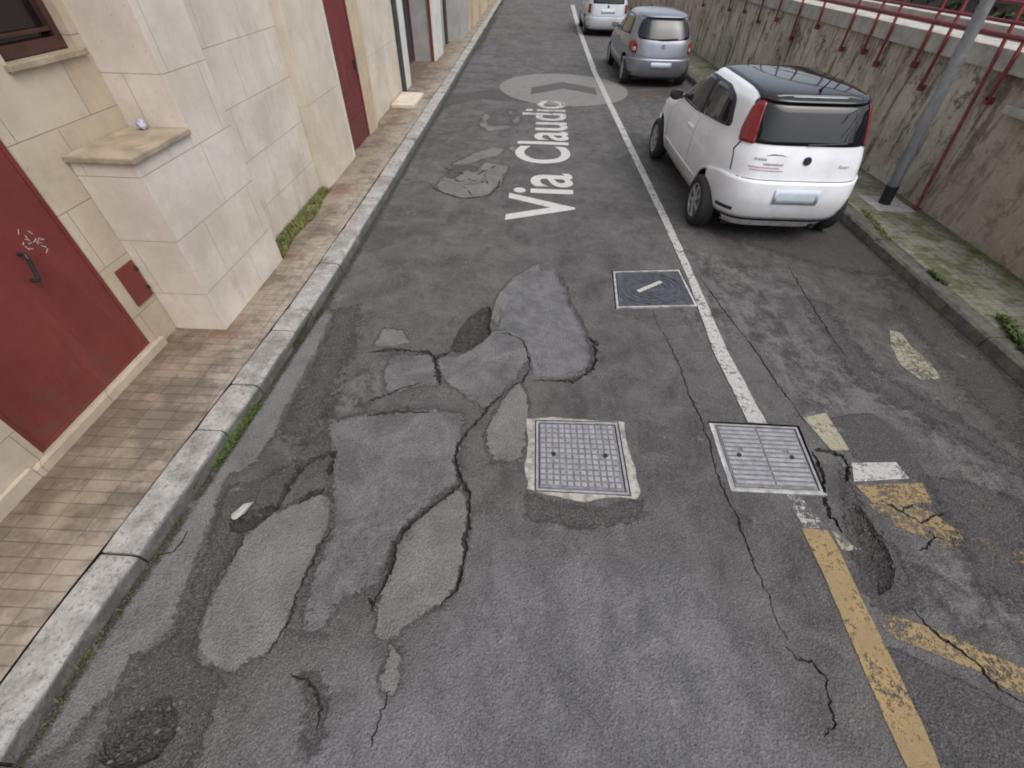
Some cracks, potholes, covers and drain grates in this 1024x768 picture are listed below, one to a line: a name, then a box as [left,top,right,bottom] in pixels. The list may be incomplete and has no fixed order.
crack [881,500,957,551]
pothole [449,306,496,354]
crack [229,538,244,564]
manhole cover [612,270,698,309]
crack [790,269,847,357]
crack [367,333,599,611]
crack [156,531,188,556]
crack [266,530,331,655]
crack [812,447,852,533]
crack [653,278,837,737]
pothole [844,498,902,597]
